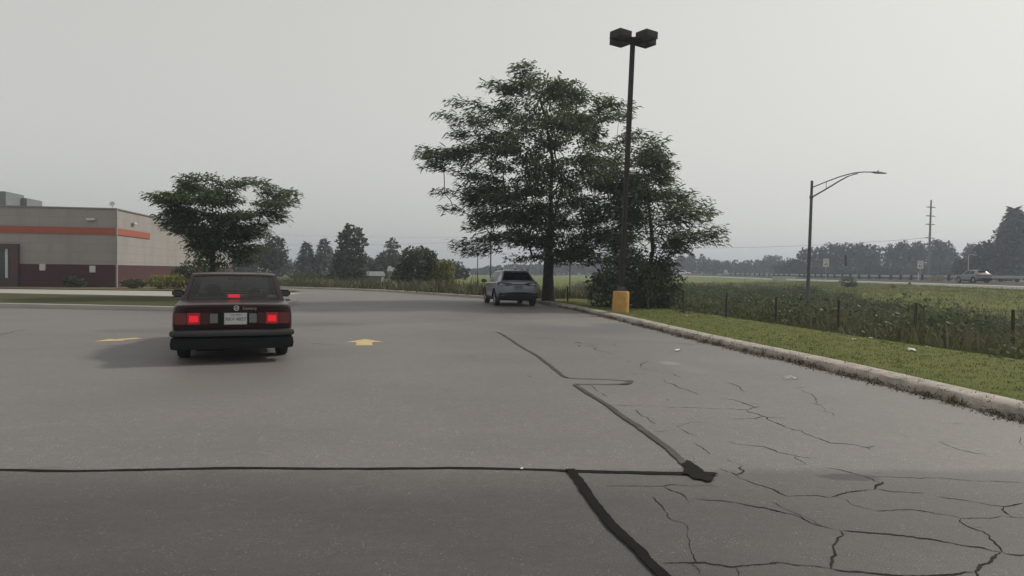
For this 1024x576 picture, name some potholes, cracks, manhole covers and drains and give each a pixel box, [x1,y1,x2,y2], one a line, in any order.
crack [610,459,1024,576]
crack [627,361,873,459]
